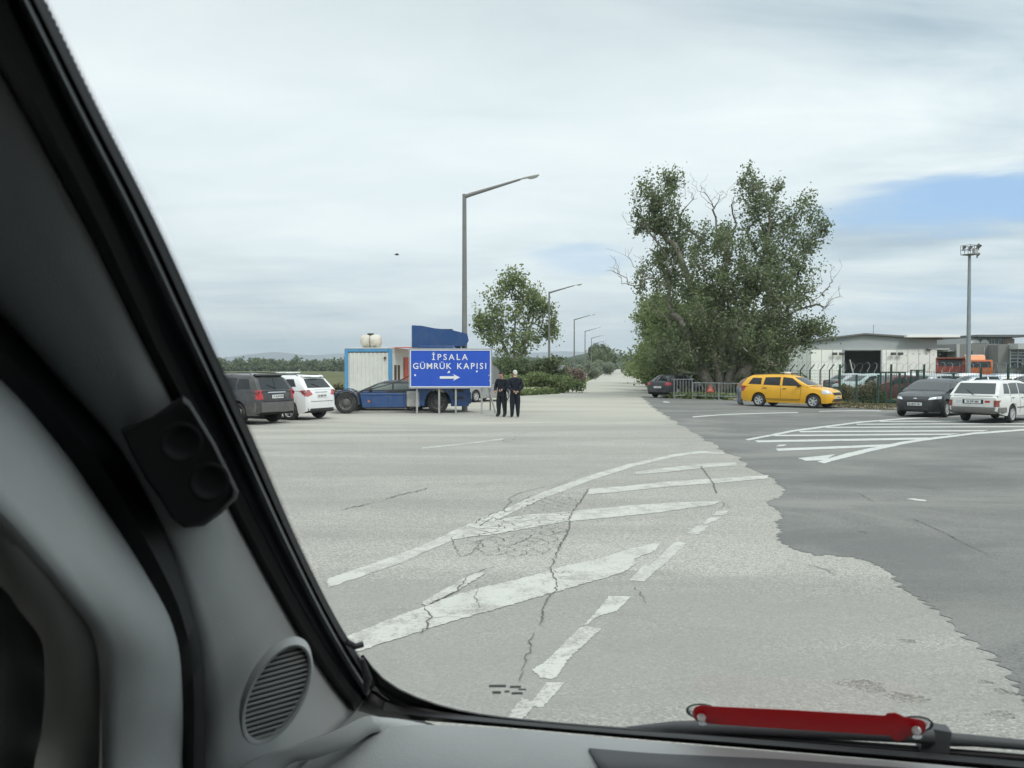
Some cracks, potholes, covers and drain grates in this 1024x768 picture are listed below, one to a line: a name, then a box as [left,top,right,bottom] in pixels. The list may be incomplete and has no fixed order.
crack [415,587,479,633]
crack [451,475,589,681]
